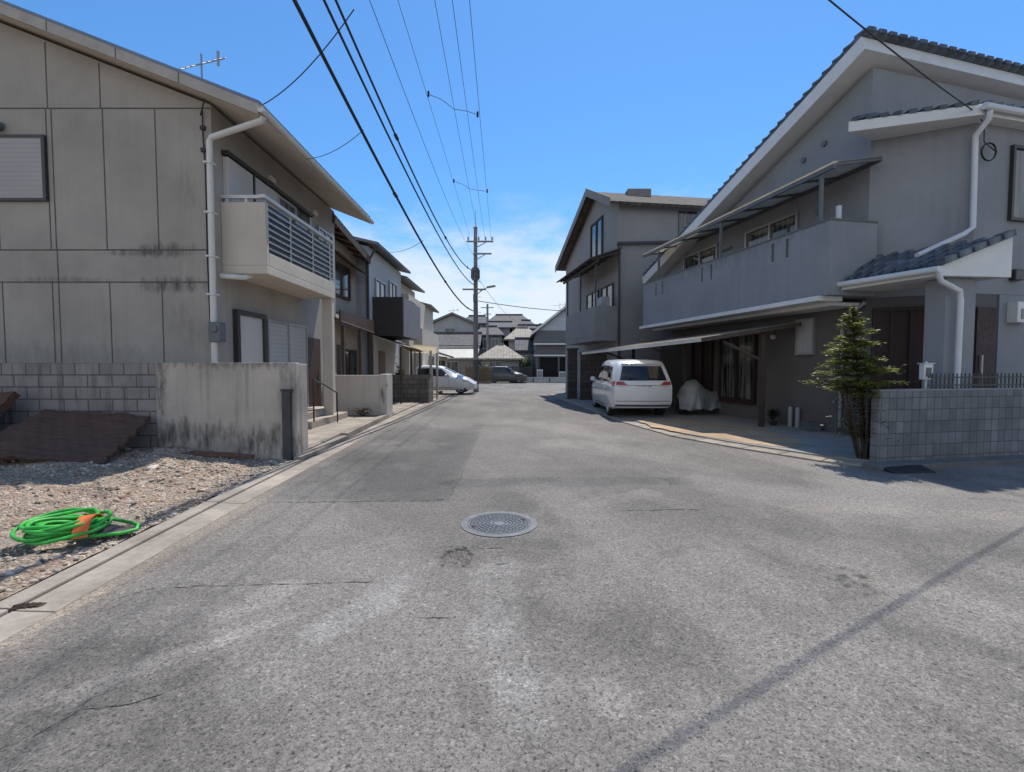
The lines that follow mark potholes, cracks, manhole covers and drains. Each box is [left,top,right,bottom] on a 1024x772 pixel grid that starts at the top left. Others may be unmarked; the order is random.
crack [115,581,367,599]
manhole cover [461,511,537,538]
crack [1,680,188,748]
